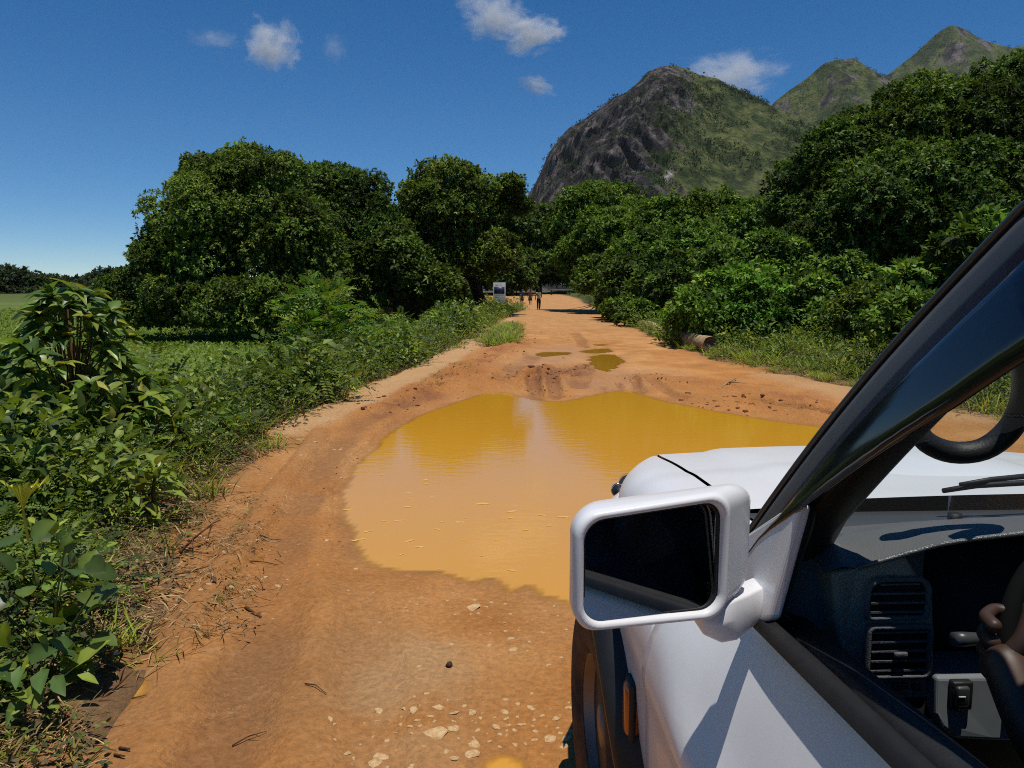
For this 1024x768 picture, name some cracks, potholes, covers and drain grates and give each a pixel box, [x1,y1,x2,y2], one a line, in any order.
pothole [524,350,579,359]
pothole [312,388,824,628]
pothole [576,352,638,372]
